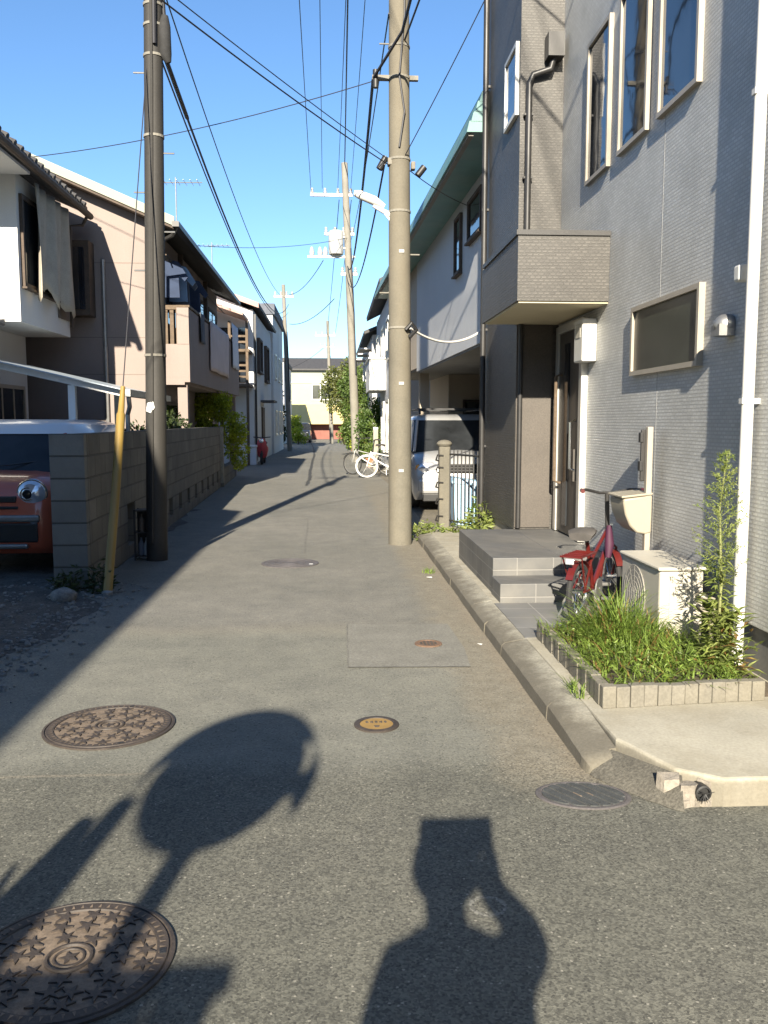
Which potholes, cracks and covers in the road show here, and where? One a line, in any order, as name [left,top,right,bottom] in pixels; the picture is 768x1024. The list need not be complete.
manhole cover [415,639,442,647]
manhole cover [535,781,632,810]
manhole cover [354,716,399,733]
manhole cover [0,901,176,1024]
manhole cover [41,704,175,751]
manhole cover [261,558,319,568]
